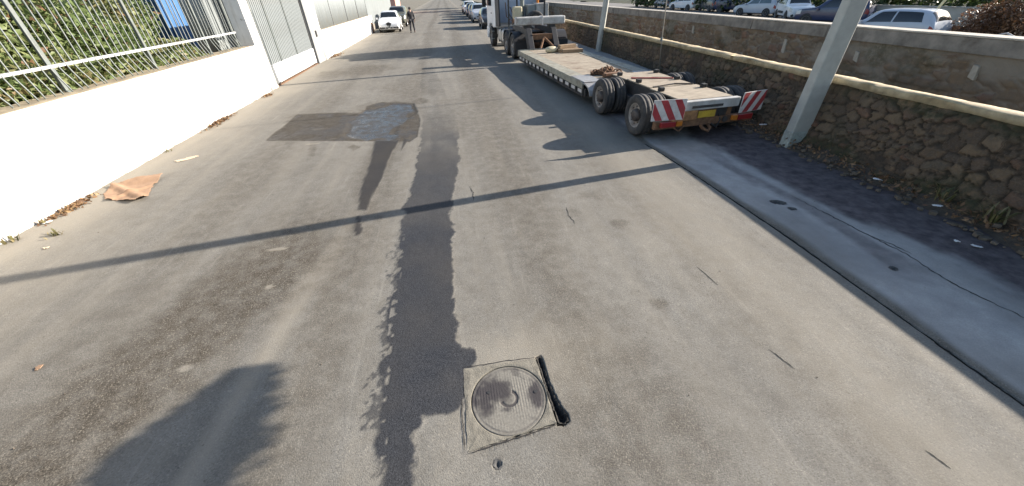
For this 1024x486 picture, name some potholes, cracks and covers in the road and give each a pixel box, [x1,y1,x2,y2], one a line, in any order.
manhole cover [463,359,557,452]
